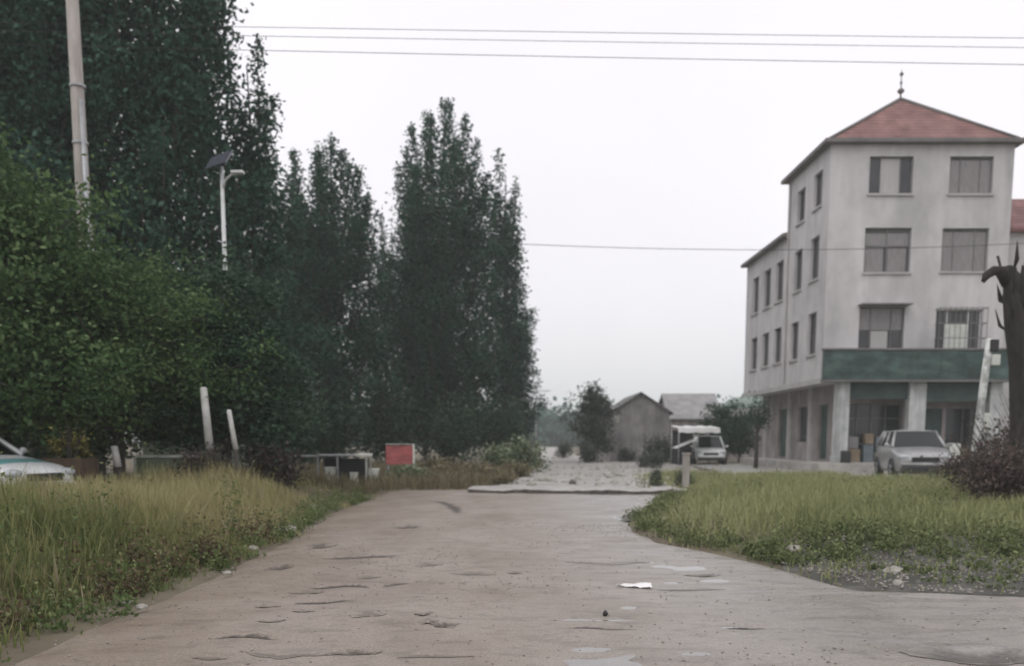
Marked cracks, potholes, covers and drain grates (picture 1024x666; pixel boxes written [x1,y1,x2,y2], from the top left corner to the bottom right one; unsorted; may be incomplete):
pothole [431,620,459,628]
pothole [349,610,386,618]
